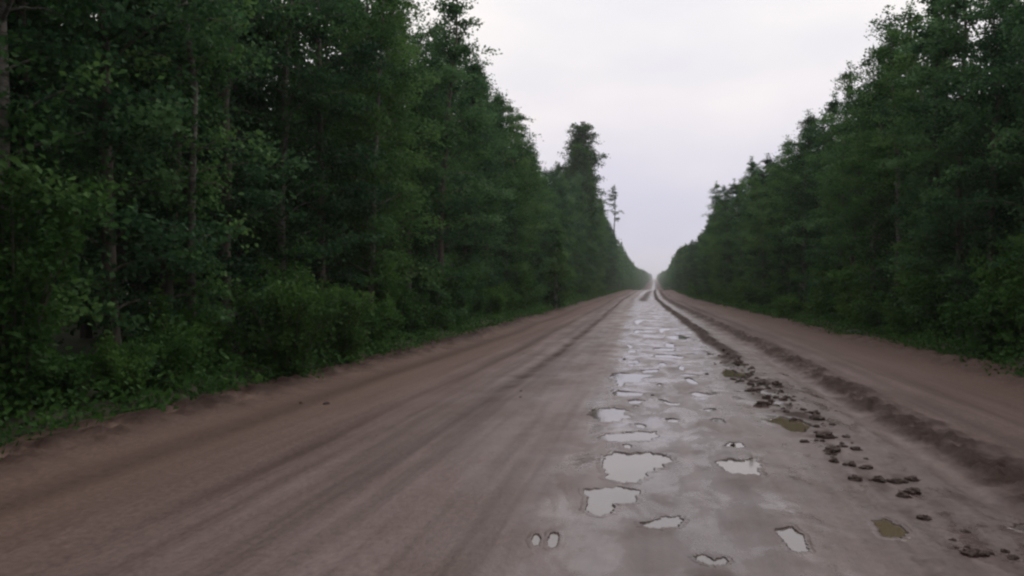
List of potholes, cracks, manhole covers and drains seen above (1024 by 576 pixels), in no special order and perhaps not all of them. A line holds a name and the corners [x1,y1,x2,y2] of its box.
pothole [634,514,690,531]
pothole [580,406,638,424]
pothole [715,368,762,378]
pothole [769,523,817,557]
pothole [577,485,646,519]
pothole [590,430,665,443]
pothole [542,529,565,553]
pothole [708,456,769,477]
pothole [865,516,917,541]
pothole [687,552,735,568]
pothole [595,450,679,485]
pothole [604,372,661,388]
